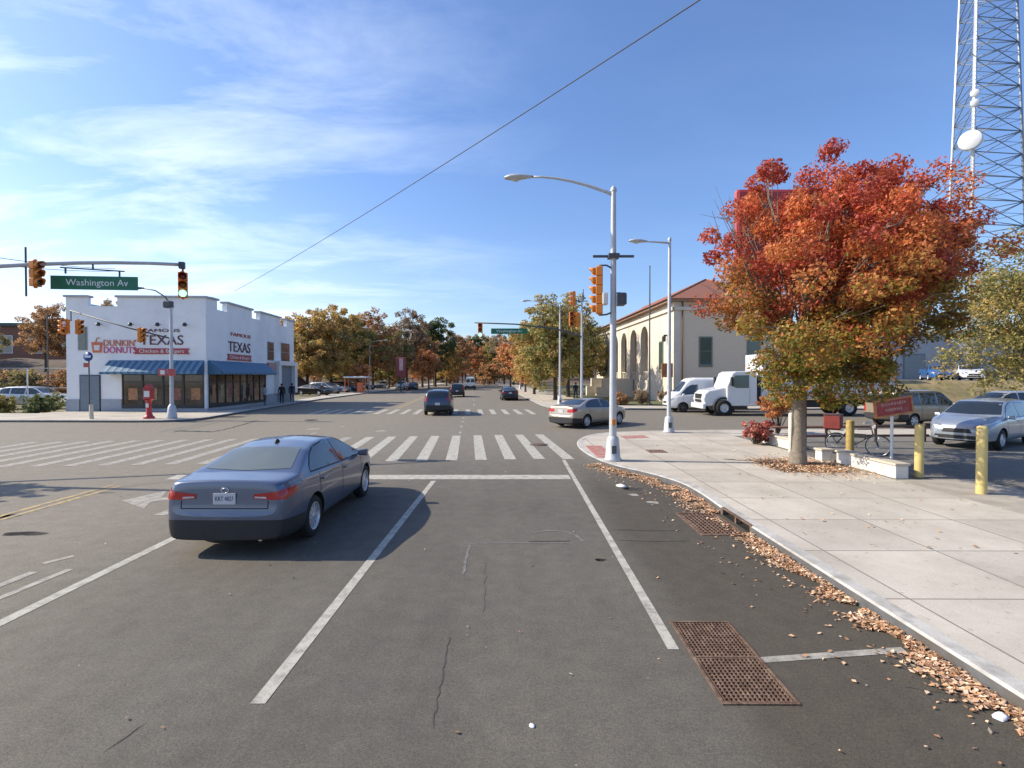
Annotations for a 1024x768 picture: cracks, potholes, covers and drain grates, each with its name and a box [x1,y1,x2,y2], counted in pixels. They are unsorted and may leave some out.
drain grate [670,621,801,706]
drain grate [676,507,762,536]
crack [432,636,450,727]
